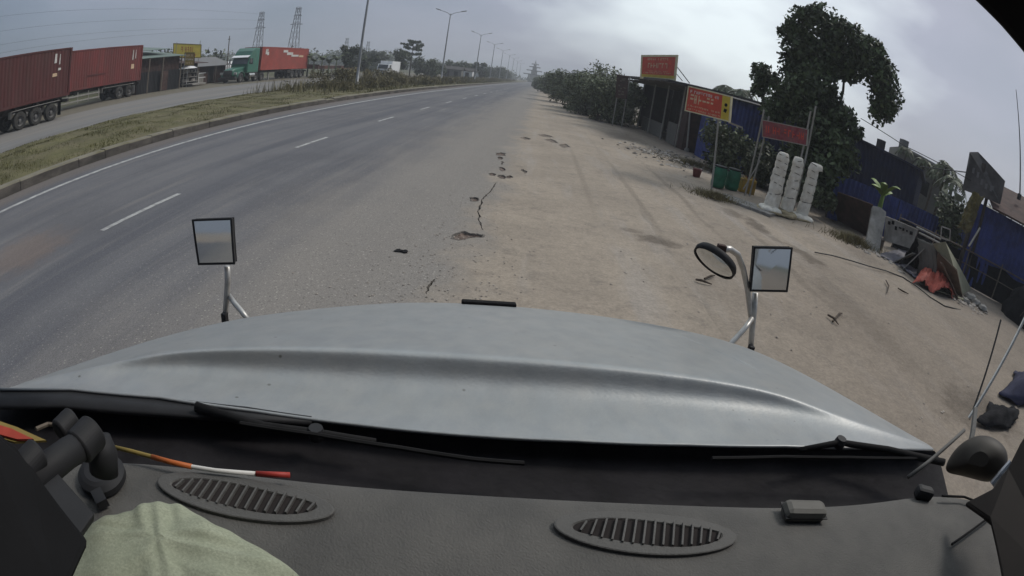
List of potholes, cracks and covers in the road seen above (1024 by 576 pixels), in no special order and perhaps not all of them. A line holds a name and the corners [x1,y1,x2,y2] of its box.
crack [477,183,496,230]
pothole [451,231,485,241]
